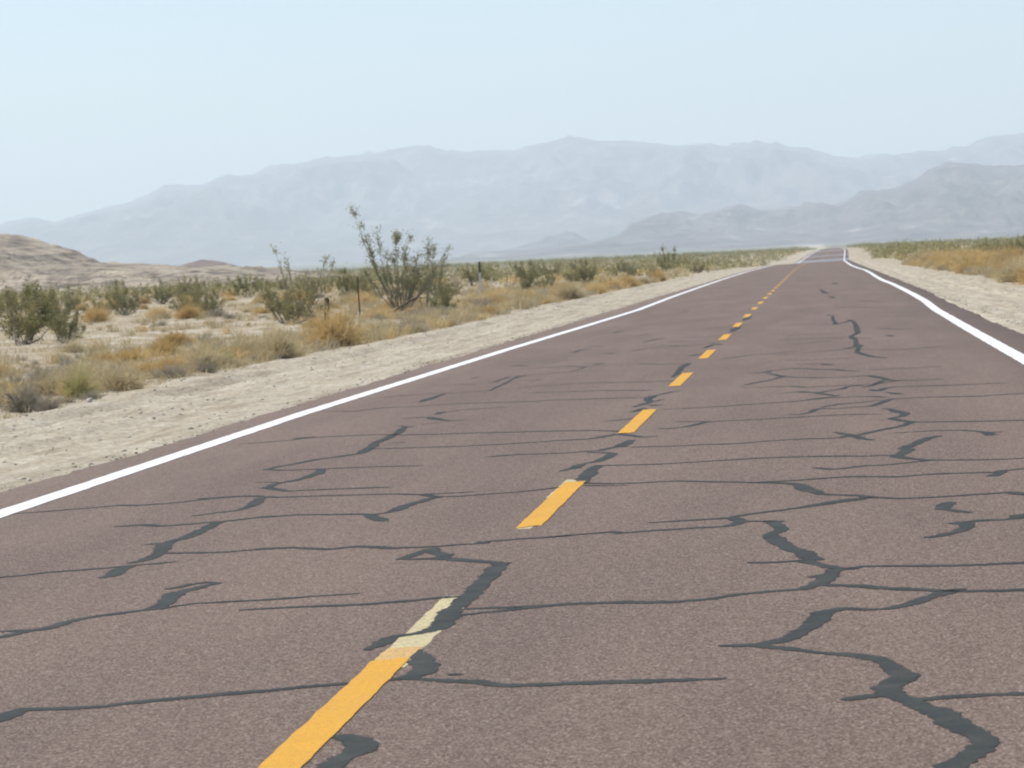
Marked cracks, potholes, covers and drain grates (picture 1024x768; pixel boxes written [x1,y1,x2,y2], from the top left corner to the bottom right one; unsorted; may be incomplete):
crack [0,283,1024,638]
